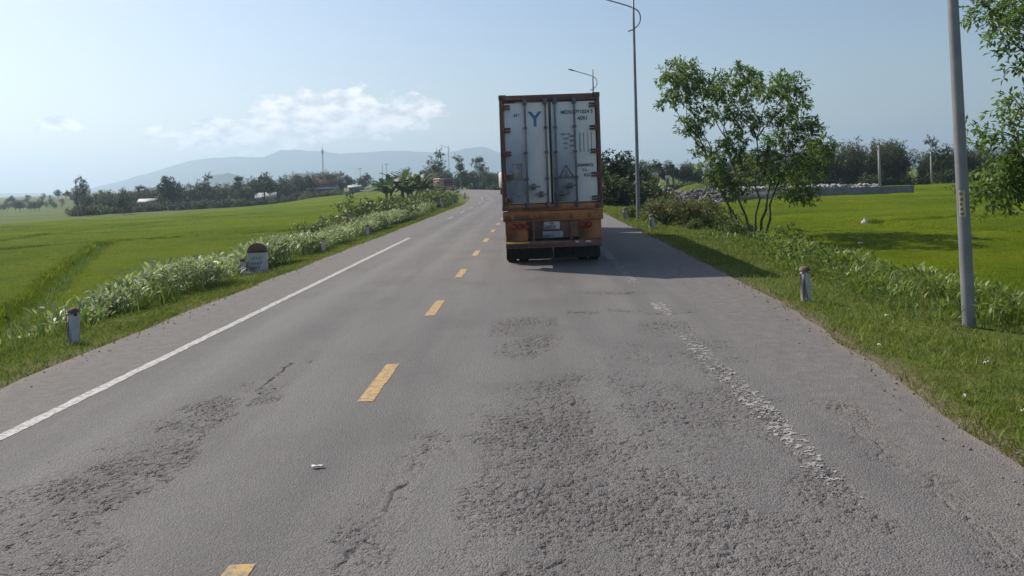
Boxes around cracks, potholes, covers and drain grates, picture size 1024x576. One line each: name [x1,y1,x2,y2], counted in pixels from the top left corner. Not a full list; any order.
crack [0,357,321,576]
crack [281,290,1024,576]
